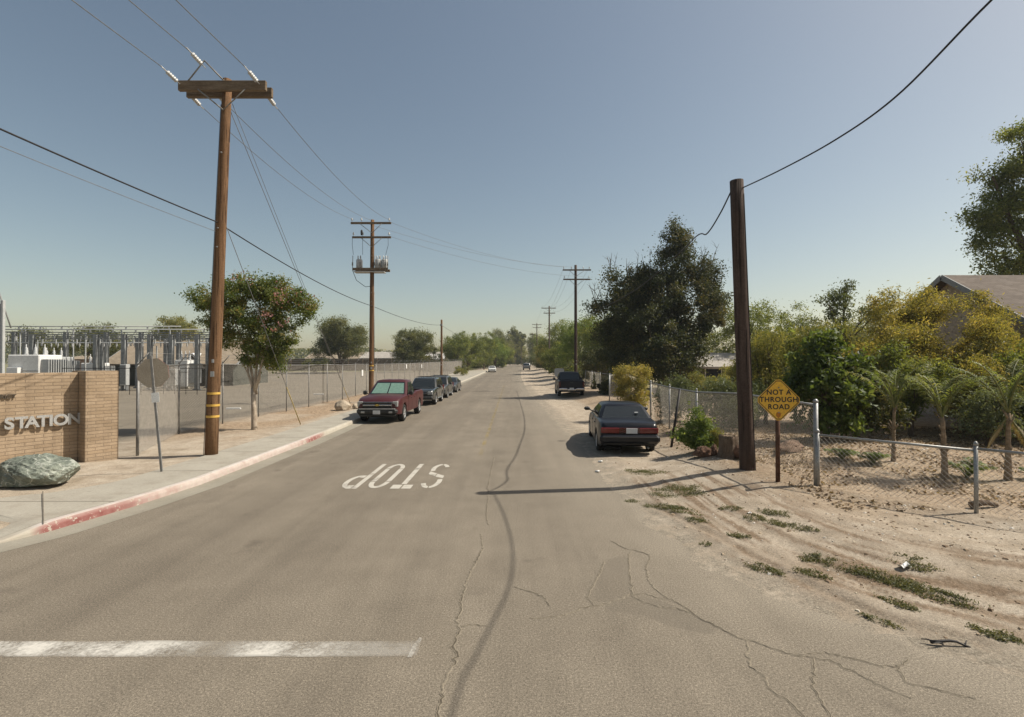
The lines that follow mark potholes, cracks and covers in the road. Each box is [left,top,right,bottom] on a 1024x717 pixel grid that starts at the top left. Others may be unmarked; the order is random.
crack [514,541,976,717]
crack [435,457,494,717]
